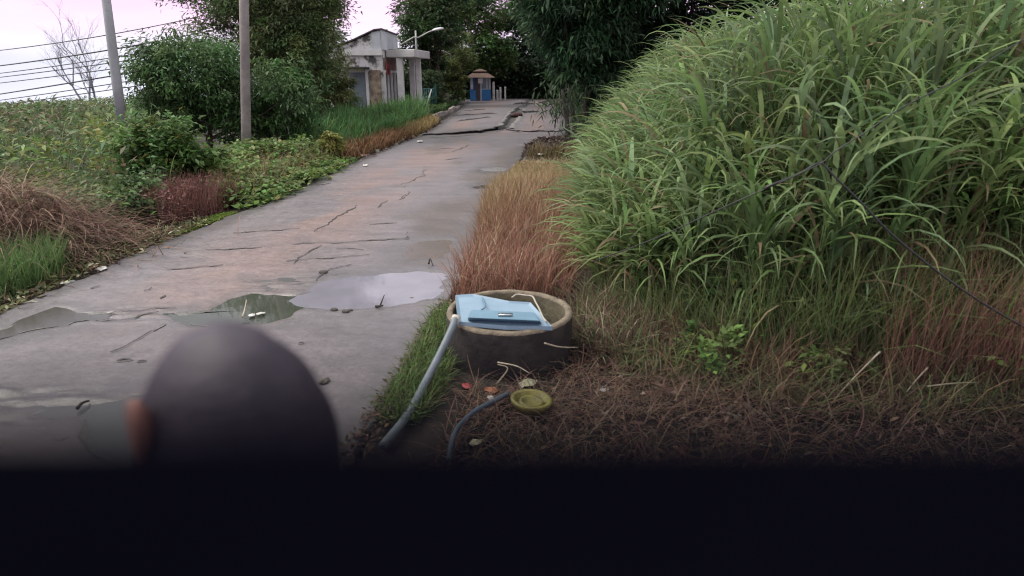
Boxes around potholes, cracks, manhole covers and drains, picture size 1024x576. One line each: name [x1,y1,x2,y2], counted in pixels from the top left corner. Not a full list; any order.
crack [440,101,548,160]
pothole [164,293,304,326]
crack [98,287,252,352]
crack [169,168,426,280]
